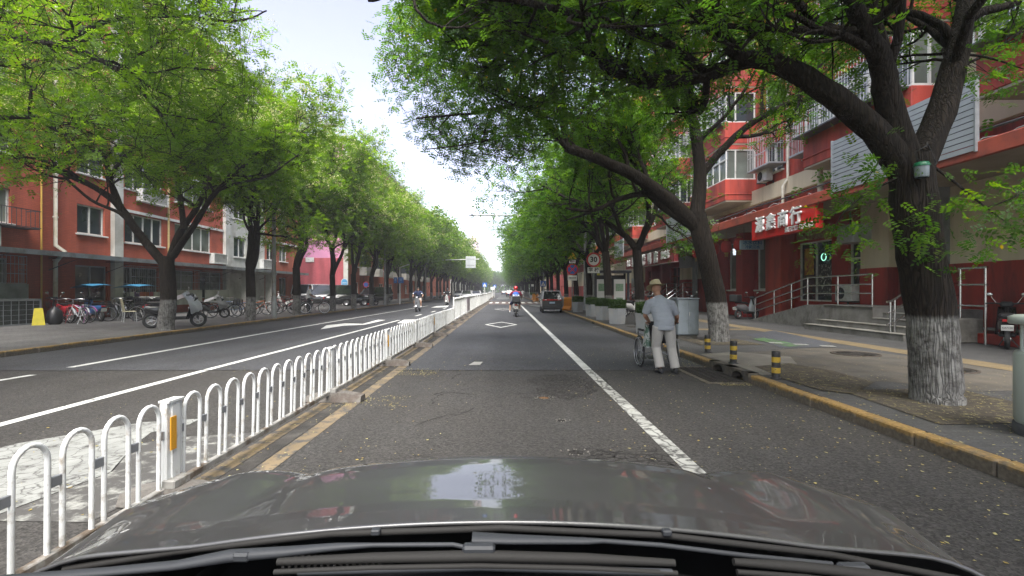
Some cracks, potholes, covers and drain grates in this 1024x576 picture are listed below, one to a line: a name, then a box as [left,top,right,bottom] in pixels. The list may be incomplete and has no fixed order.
drain grate [678,360,759,384]
